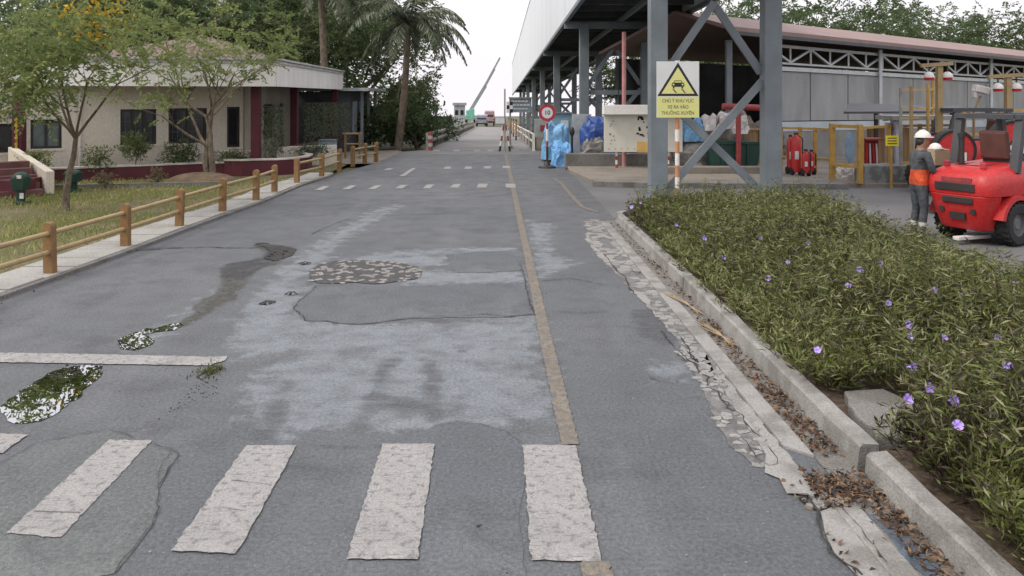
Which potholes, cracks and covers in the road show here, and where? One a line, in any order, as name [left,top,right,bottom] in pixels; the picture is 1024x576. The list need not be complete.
crack [293,219,778,468]
pothole [264,245,297,261]
